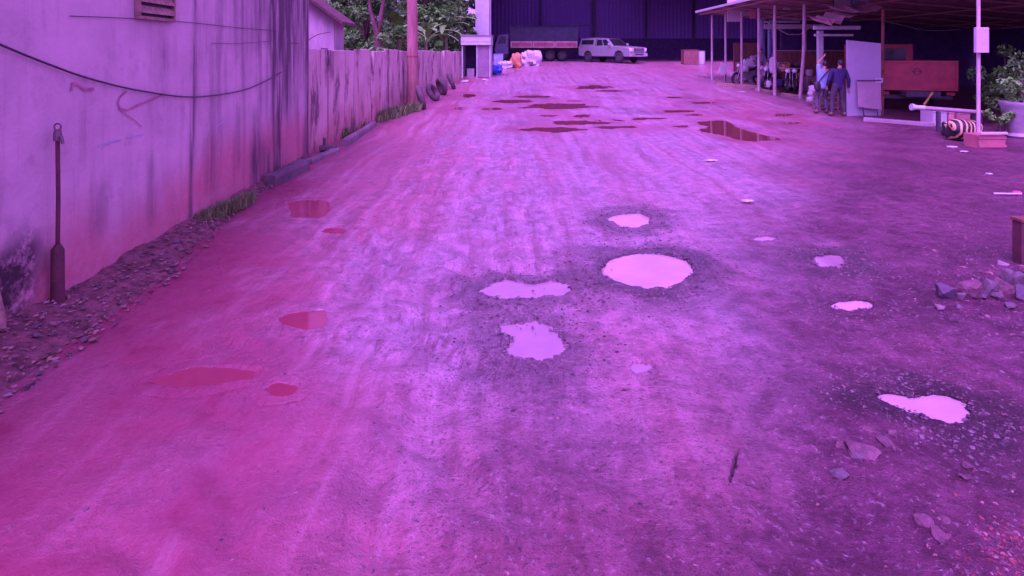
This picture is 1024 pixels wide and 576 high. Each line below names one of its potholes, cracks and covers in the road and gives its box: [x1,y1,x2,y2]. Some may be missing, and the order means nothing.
pothole [585,249,711,296]
pothole [793,249,866,273]
pothole [848,382,1000,440]
pothole [461,274,589,307]
pothole [819,294,889,316]
pothole [597,208,664,233]
pothole [483,310,591,374]
pothole [263,305,344,337]
